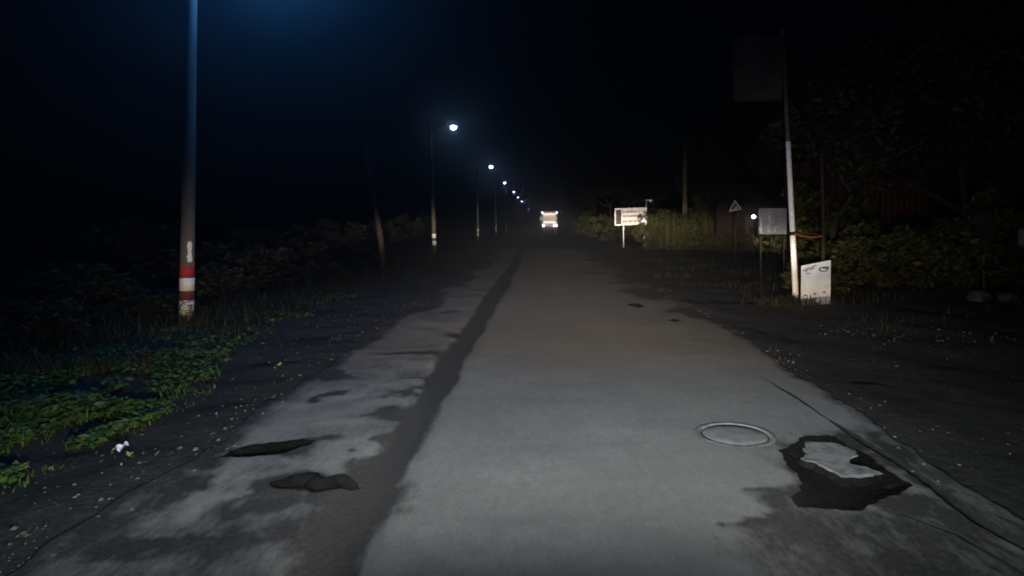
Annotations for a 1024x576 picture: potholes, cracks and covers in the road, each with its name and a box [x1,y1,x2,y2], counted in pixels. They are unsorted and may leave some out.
pothole [778,435,913,511]
pothole [220,438,315,457]
pothole [269,472,362,493]
manhole cover [695,422,776,447]
